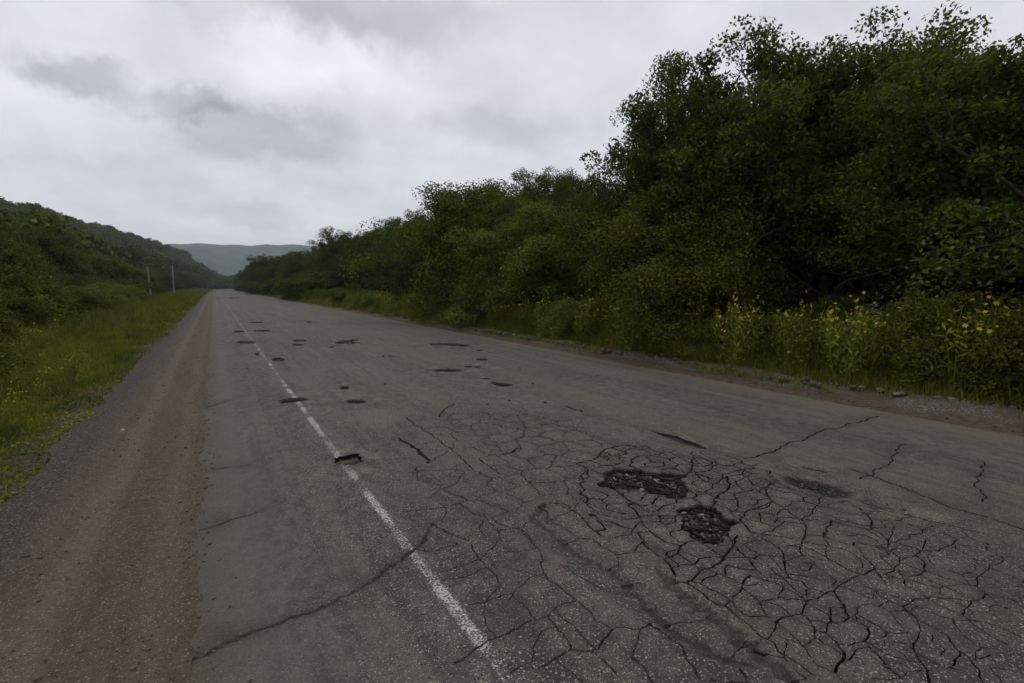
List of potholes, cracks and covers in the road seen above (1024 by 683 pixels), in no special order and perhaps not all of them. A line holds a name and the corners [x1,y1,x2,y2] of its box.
crack [192,404,1024,683]
pothole [676,504,740,545]
pothole [334,453,364,466]
pothole [597,468,689,499]
